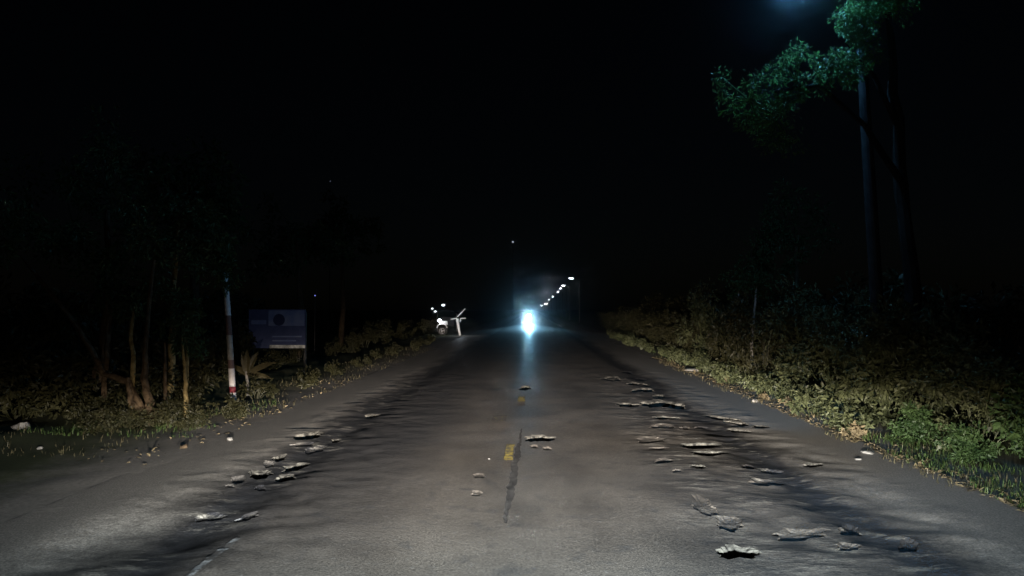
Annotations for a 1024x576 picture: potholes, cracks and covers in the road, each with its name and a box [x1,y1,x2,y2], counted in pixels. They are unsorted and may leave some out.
pothole [525,434,556,442]
pothole [194,512,228,523]
pothole [292,430,325,440]
crack [502,428,522,523]
pothole [248,470,273,480]
pothole [715,516,744,532]
pothole [638,399,686,409]
pothole [898,536,919,553]
pothole [772,528,830,542]
pothole [691,494,719,517]
pothole [716,544,762,560]
